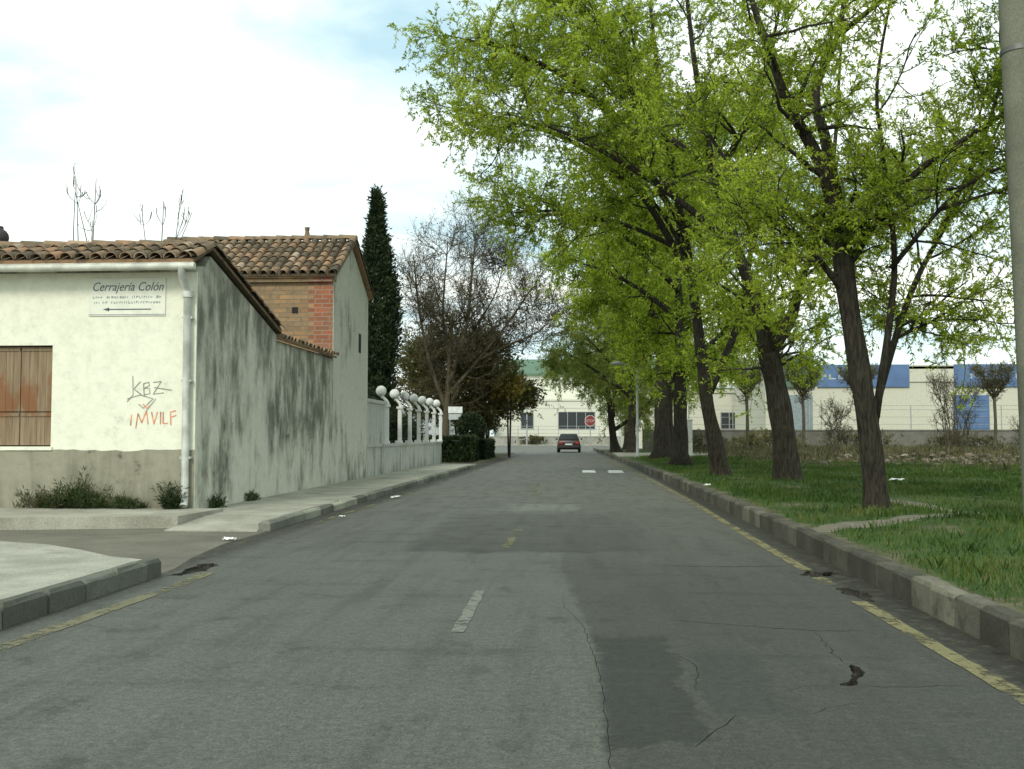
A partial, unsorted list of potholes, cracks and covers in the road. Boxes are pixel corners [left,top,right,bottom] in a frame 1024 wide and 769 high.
pothole [836,588,875,602]
pothole [168,563,220,576]
pothole [840,665,865,686]
crack [688,715,736,747]
crack [679,620,856,664]
